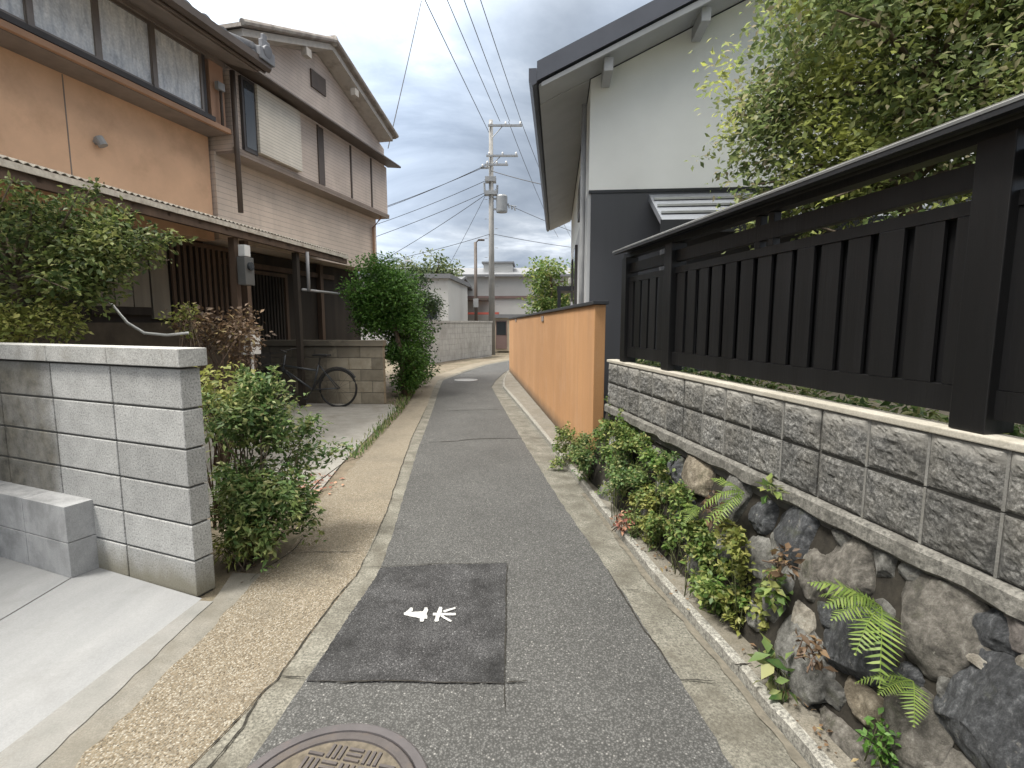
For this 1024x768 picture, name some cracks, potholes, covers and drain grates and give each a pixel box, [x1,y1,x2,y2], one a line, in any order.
manhole cover [247,723,428,768]
